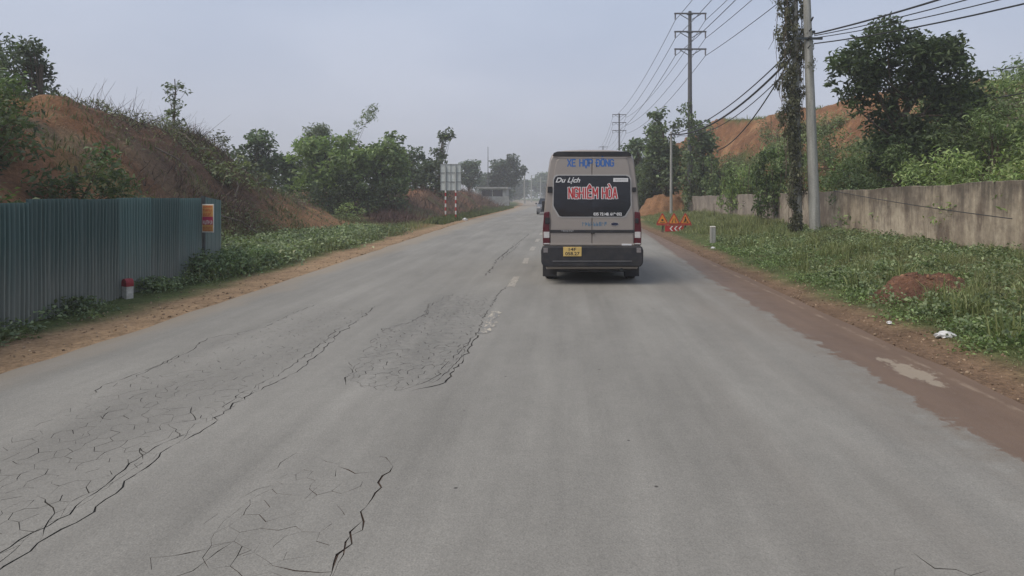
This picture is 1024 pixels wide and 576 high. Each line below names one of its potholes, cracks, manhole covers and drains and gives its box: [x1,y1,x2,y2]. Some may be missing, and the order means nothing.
crack [0,306,375,570]
crack [344,283,509,390]
